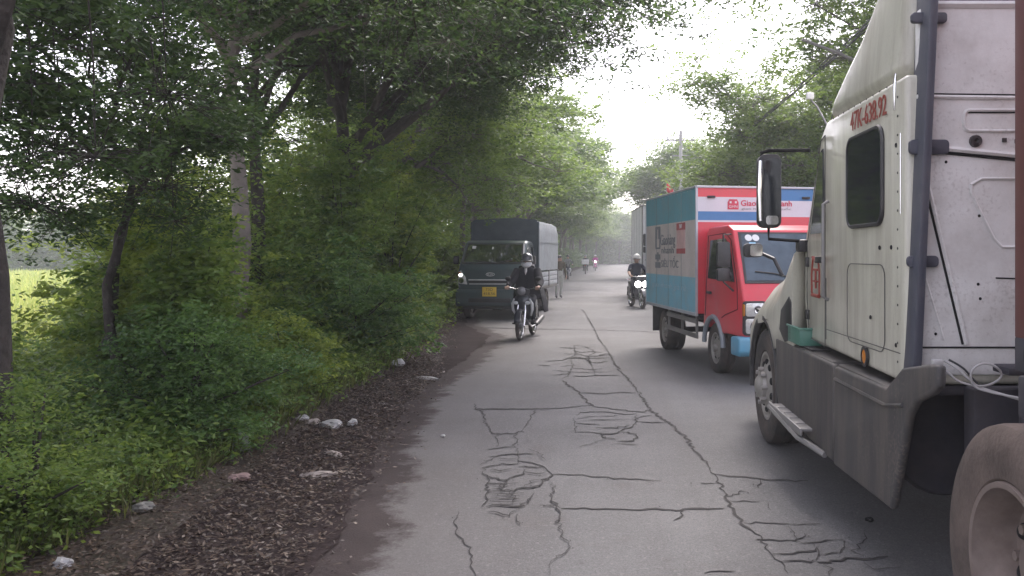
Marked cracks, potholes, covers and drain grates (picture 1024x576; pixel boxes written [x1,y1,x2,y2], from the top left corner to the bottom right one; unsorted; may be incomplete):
crack [452,309,896,576]
